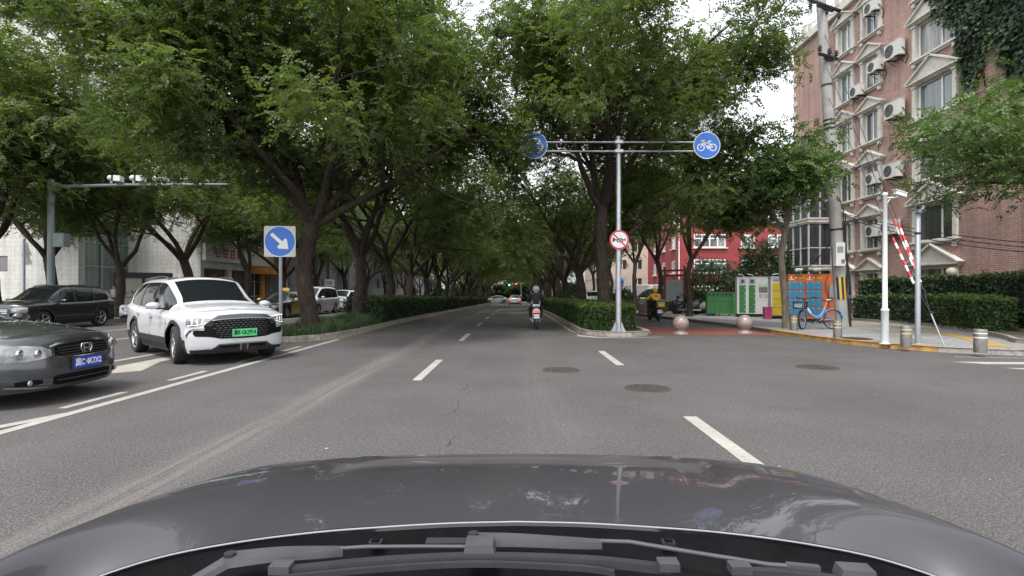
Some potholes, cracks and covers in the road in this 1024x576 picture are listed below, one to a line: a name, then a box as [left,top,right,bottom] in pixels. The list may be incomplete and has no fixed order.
manhole cover [624,384,671,393]
